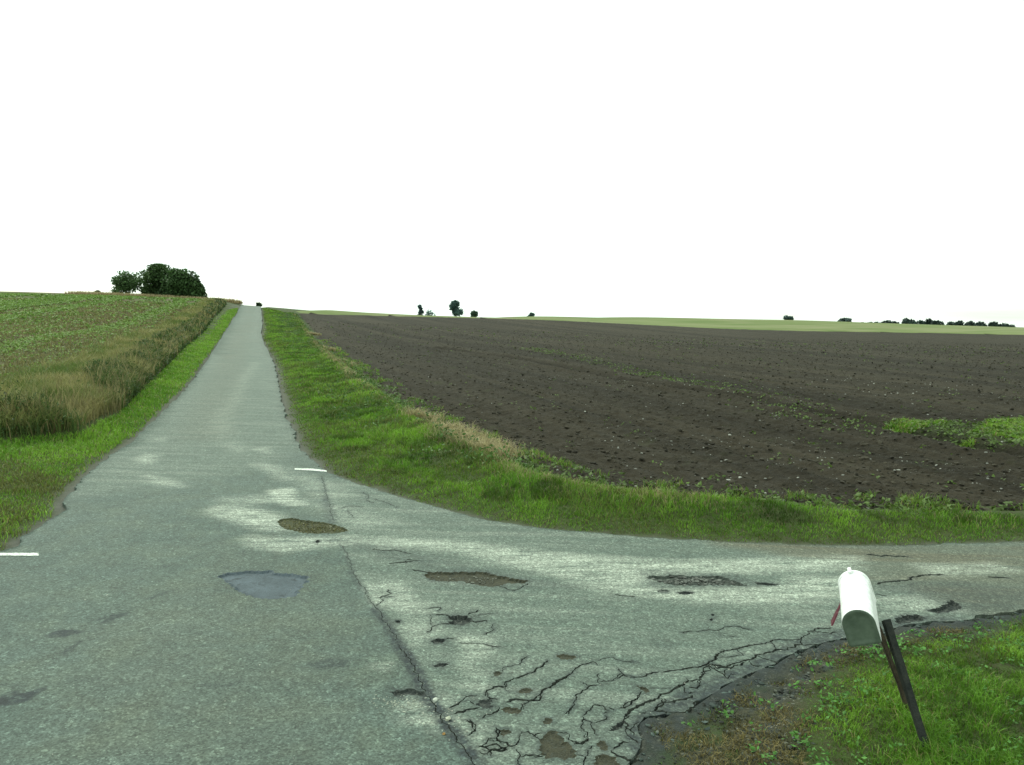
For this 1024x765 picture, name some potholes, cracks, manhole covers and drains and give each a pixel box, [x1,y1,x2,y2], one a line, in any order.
pothole [646,574,747,586]
pothole [446,615,472,625]
pothole [927,600,962,614]
pothole [277,518,347,534]
crack [373,547,427,573]
pothole [424,571,528,587]
pothole [894,614,926,624]
